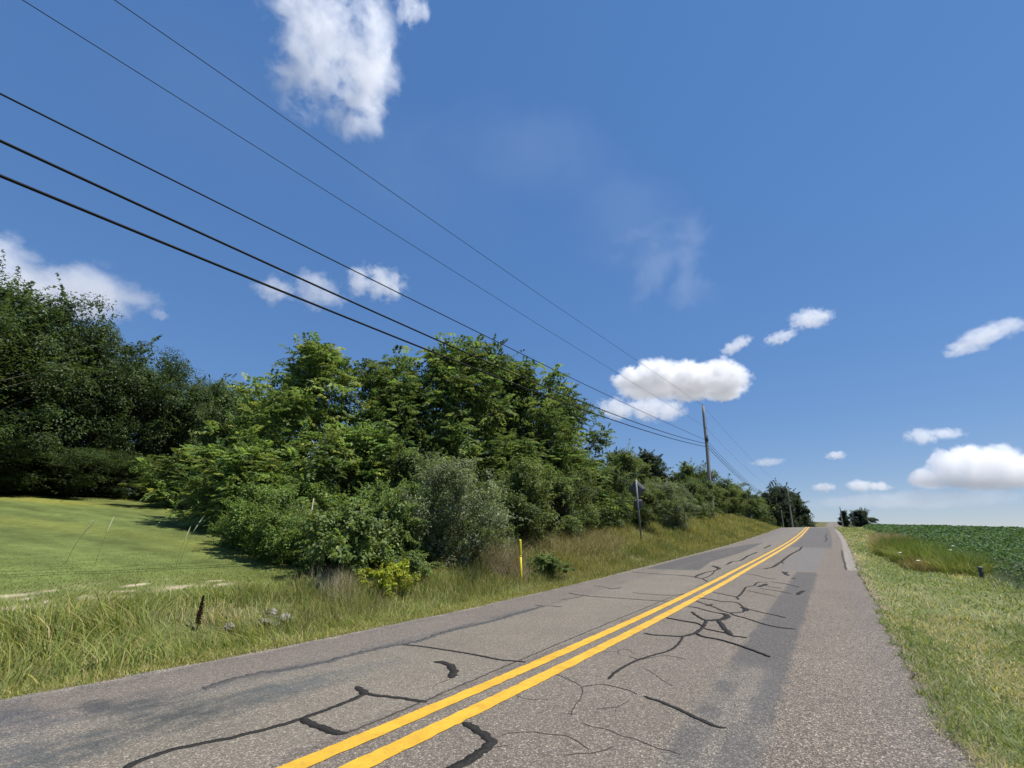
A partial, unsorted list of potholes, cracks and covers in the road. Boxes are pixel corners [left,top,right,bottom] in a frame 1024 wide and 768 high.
crack [349,597,670,733]
crack [608,649,684,686]
